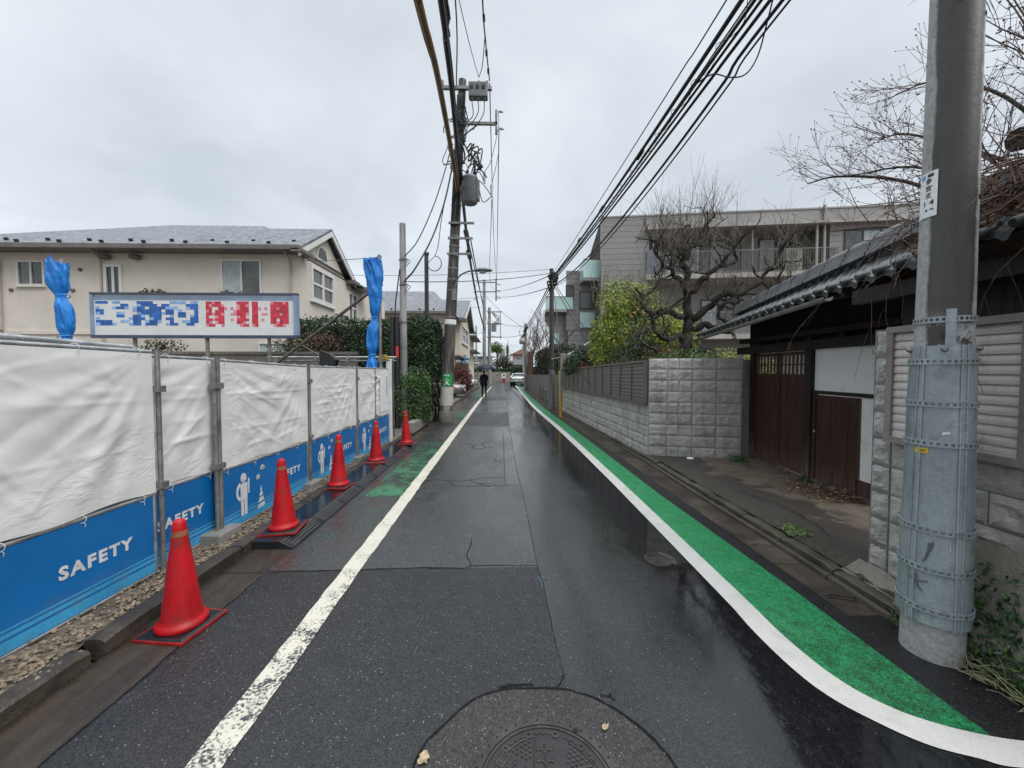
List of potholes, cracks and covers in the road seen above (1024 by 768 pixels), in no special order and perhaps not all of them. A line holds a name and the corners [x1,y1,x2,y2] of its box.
utility cover [644,552,677,567]
crack [424,434,506,486]
crack [275,539,521,572]
manhole cover [473,717,618,768]
